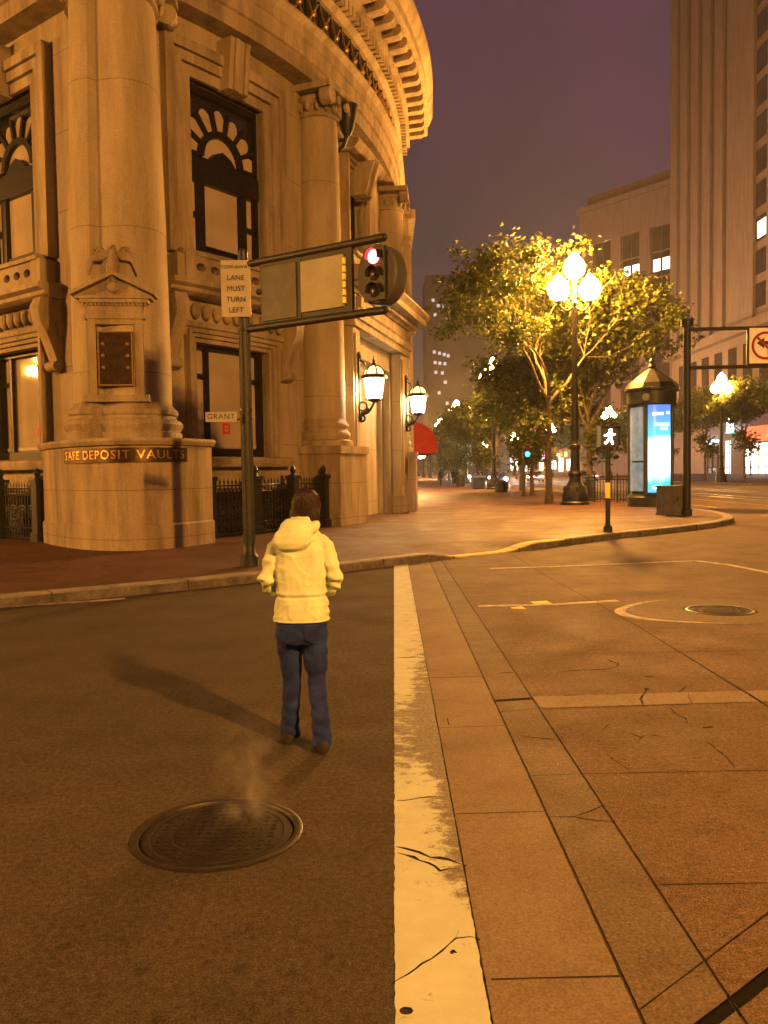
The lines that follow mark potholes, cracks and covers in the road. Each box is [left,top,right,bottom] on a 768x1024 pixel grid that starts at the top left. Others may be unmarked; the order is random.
crack [396,846,467,872]
crack [549,805,615,823]
manhole cover [129,798,303,873]
crack [392,931,480,984]
